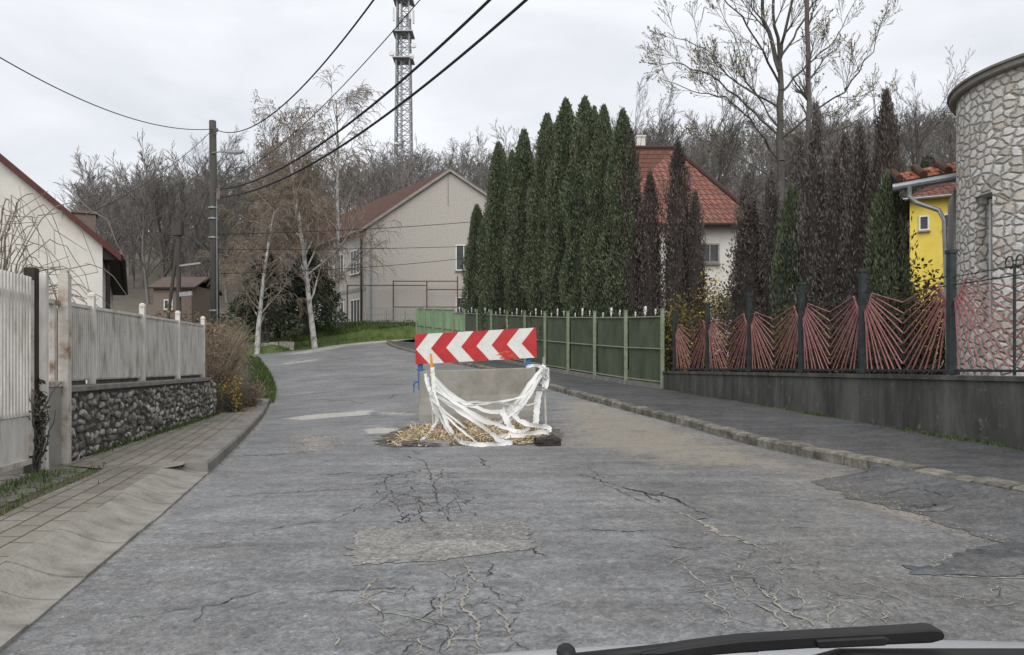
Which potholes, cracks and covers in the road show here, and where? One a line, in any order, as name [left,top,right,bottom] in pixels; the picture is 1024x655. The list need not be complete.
crack [648,527,1024,630]
pothole [374,422,564,447]
crack [317,559,567,653]
crack [354,440,492,523]
